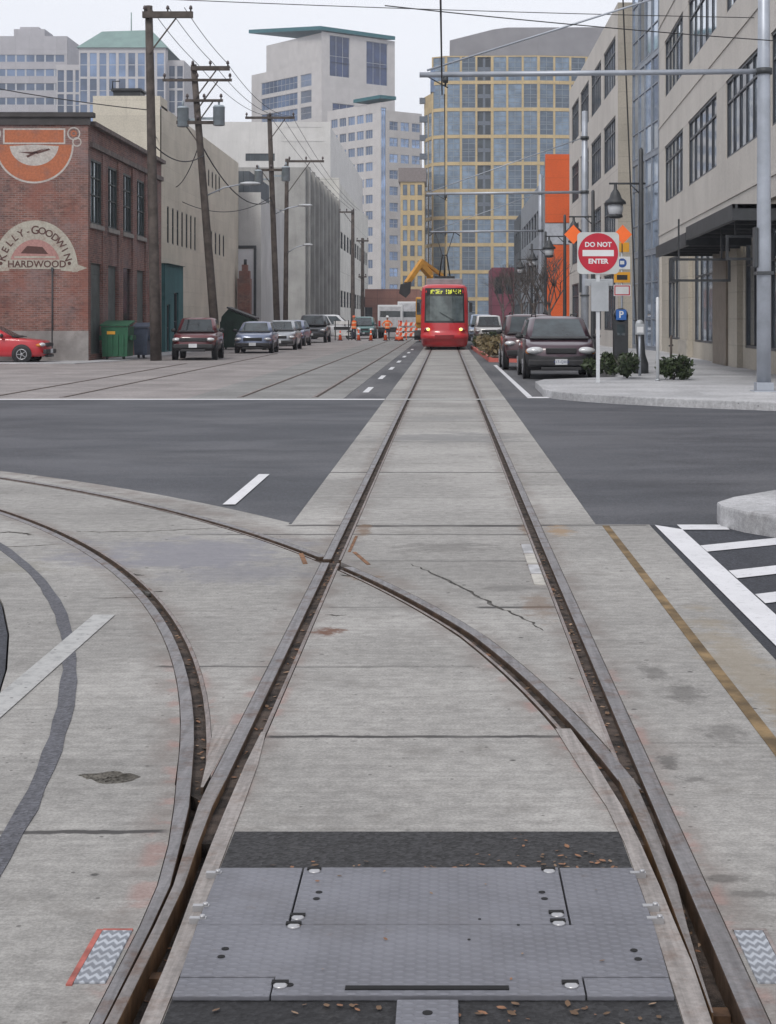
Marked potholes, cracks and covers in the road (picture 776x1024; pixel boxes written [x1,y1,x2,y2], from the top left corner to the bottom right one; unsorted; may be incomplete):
crack [411,564,544,631]
